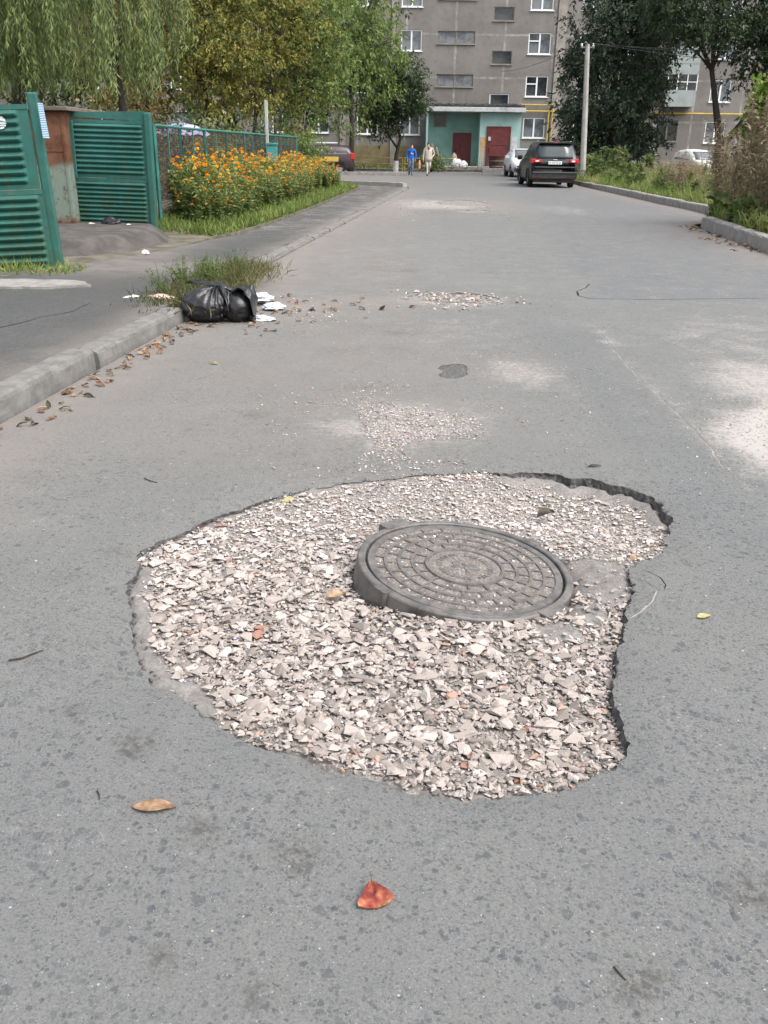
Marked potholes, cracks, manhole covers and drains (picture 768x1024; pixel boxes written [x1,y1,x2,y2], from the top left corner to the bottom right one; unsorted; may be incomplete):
pothole [402,293,500,306]
crack [600,333,768,500]
crack [576,284,748,300]
manhole cover [350,518,574,627]
crack [629,571,666,619]
pothole [126,471,674,803]
